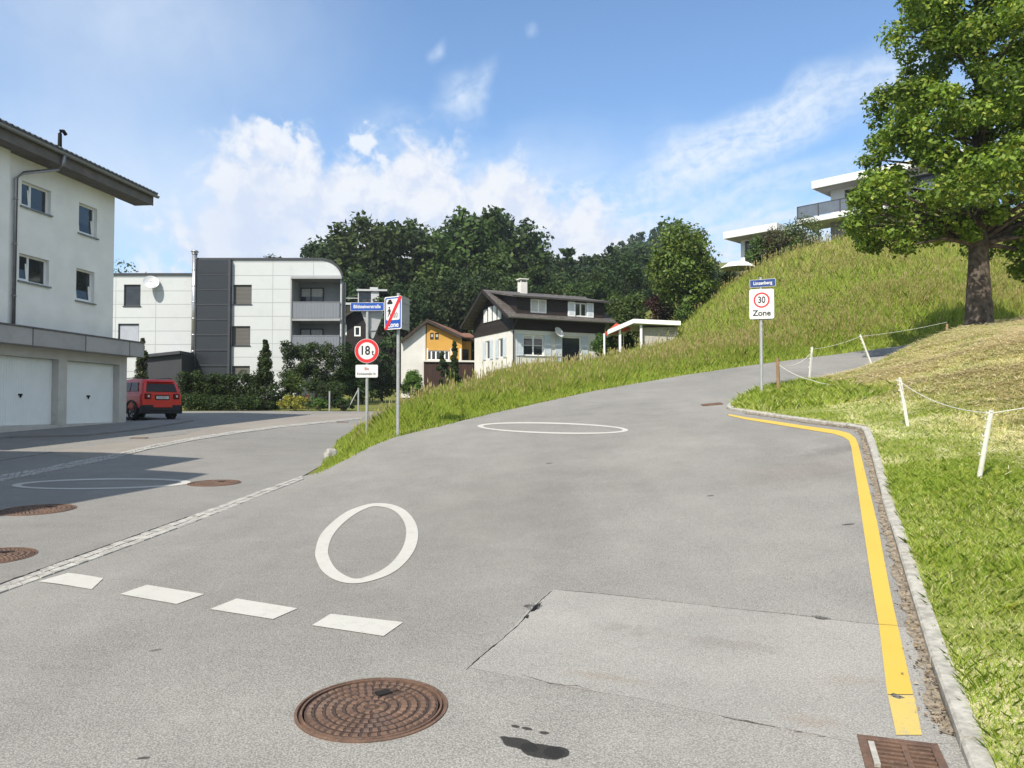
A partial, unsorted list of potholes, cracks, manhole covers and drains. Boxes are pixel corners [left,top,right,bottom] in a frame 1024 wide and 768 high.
crack [722,716,775,727]
manhole cover [0,504,77,516]
manhole cover [294,677,448,743]
crack [466,589,904,670]
drain grate [857,734,949,768]
manhole cover [0,547,38,564]
